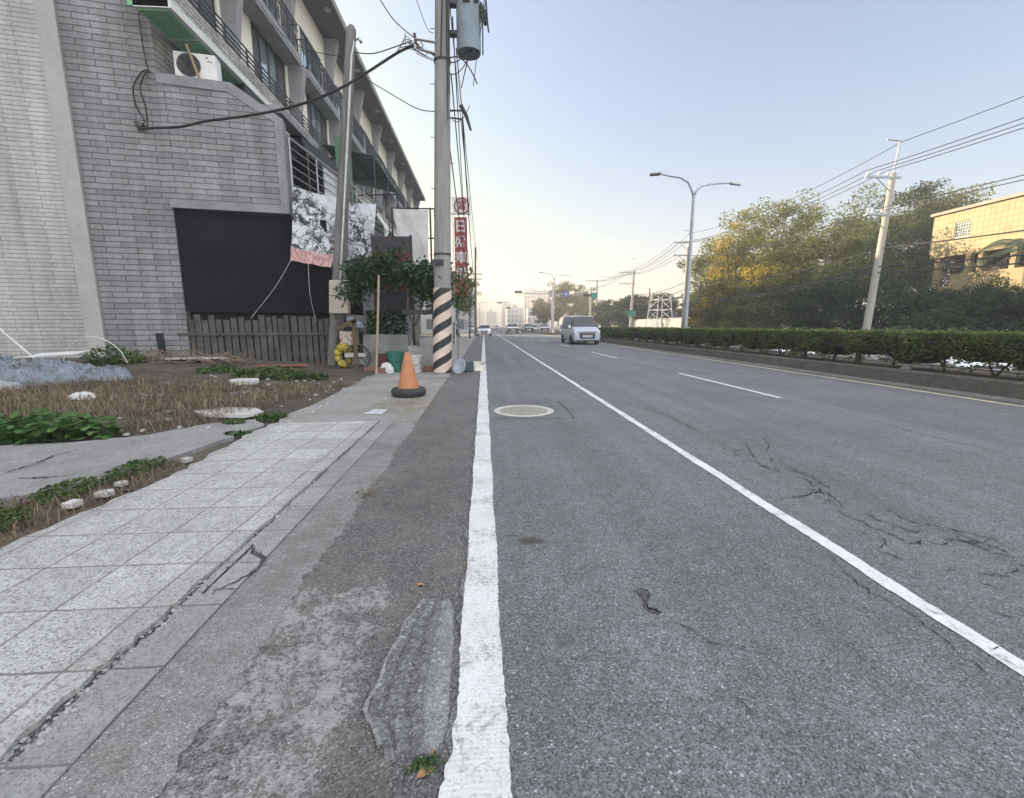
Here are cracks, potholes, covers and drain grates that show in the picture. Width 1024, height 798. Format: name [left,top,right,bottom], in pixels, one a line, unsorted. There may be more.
manhole cover [494,405,554,417]
crack [828,554,1014,687]
crack [608,394,1024,618]
